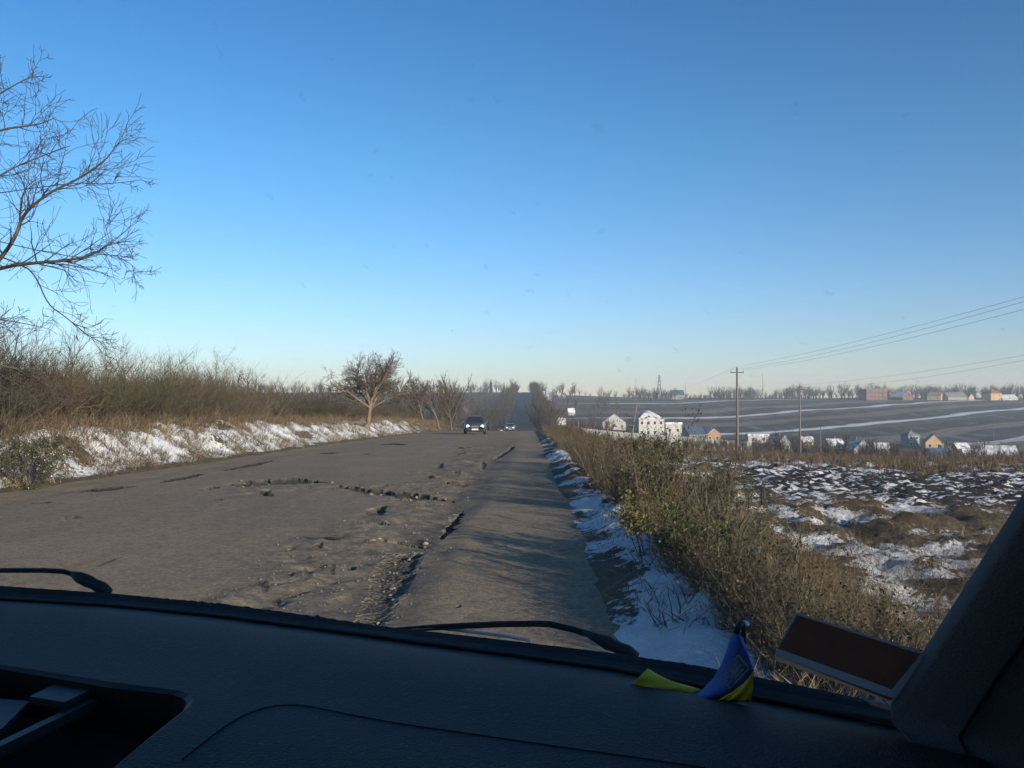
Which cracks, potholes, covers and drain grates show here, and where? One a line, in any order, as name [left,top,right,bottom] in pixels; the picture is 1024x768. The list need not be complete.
crack [223,461,273,471]
pothole [224,476,334,487]
pothole [362,505,389,515]
pothole [355,552,426,627]
pothole [336,485,455,503]
crack [159,474,223,501]
pothole [438,512,465,540]
